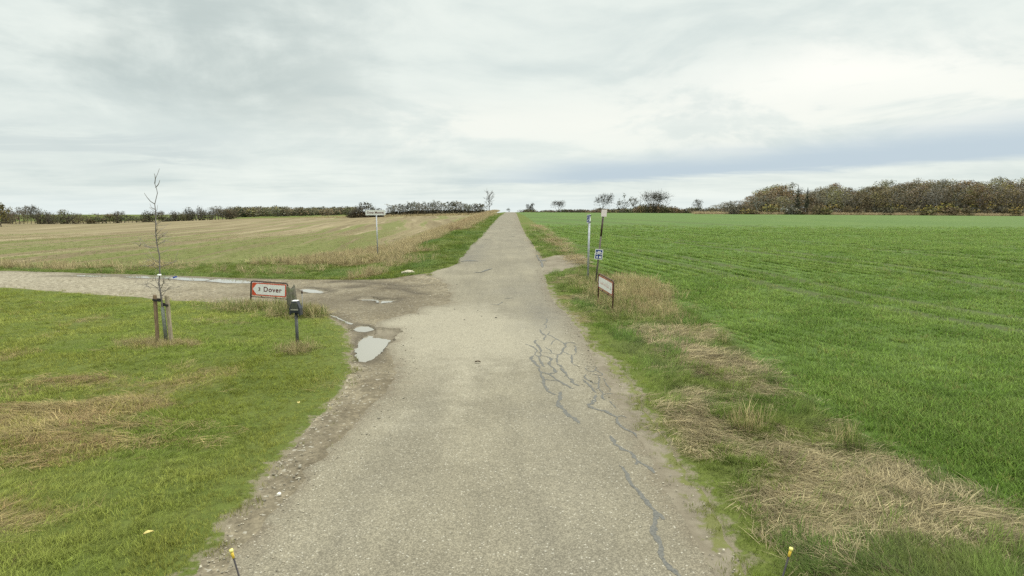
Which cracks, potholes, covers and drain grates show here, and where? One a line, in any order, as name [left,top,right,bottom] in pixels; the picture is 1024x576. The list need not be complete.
pothole [353,328,403,362]
